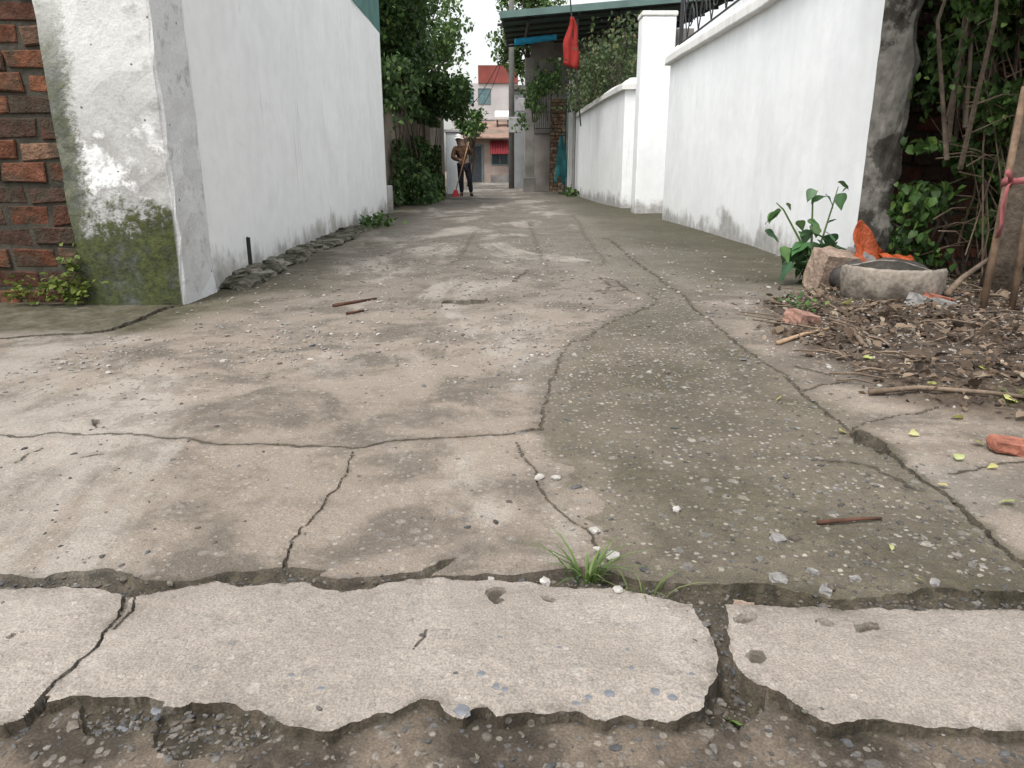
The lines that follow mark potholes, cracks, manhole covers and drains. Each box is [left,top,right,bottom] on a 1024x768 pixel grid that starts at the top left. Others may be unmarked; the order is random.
pothole [485,587,506,604]
pothole [152,702,277,761]
crack [0,215,1024,714]
pothole [79,697,165,738]
